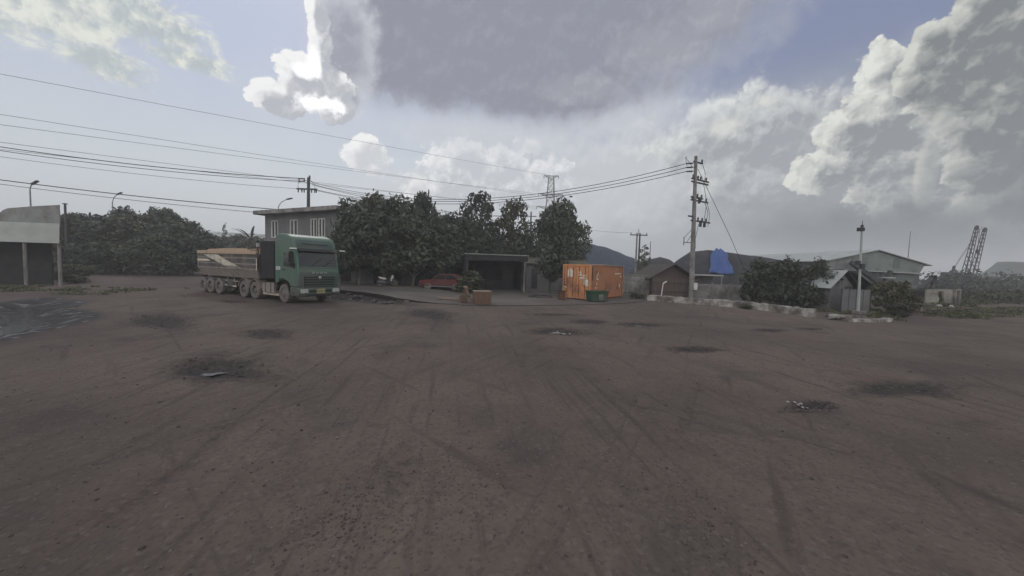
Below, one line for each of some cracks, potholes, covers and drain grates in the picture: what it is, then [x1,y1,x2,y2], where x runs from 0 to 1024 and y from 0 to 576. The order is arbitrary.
pothole [405,309,455,322]
pothole [165,356,276,383]
pothole [124,313,193,331]
pothole [849,381,959,397]
pothole [785,400,840,413]
pothole [526,328,588,336]
pothole [243,329,293,339]
